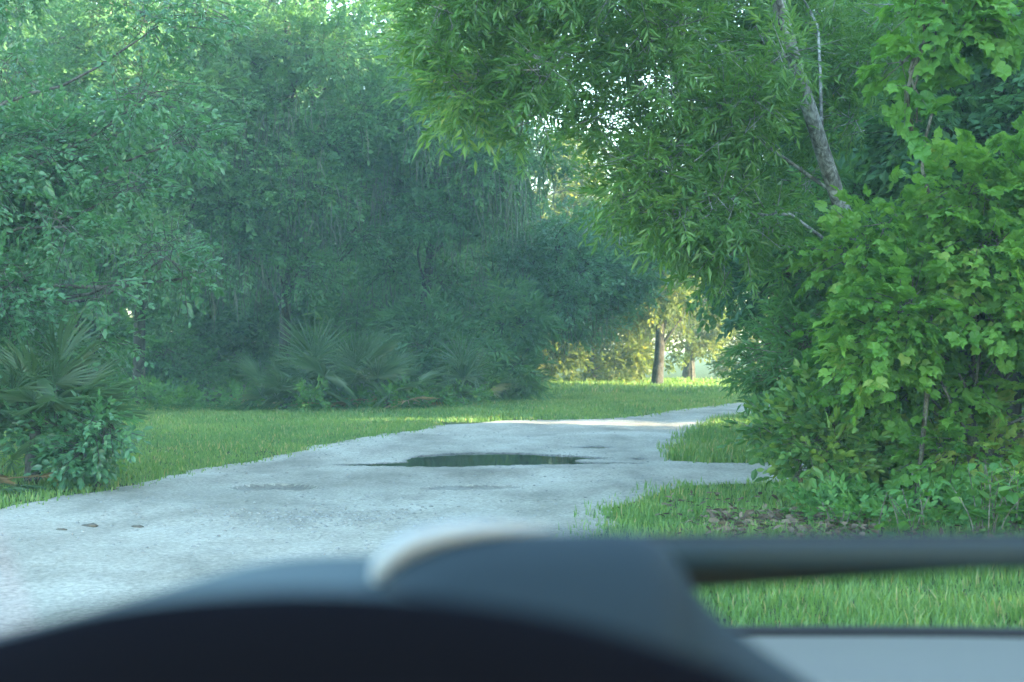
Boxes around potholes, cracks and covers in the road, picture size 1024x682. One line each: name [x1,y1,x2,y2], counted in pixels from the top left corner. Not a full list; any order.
pothole [226,483,325,491]
pothole [330,452,650,468]
